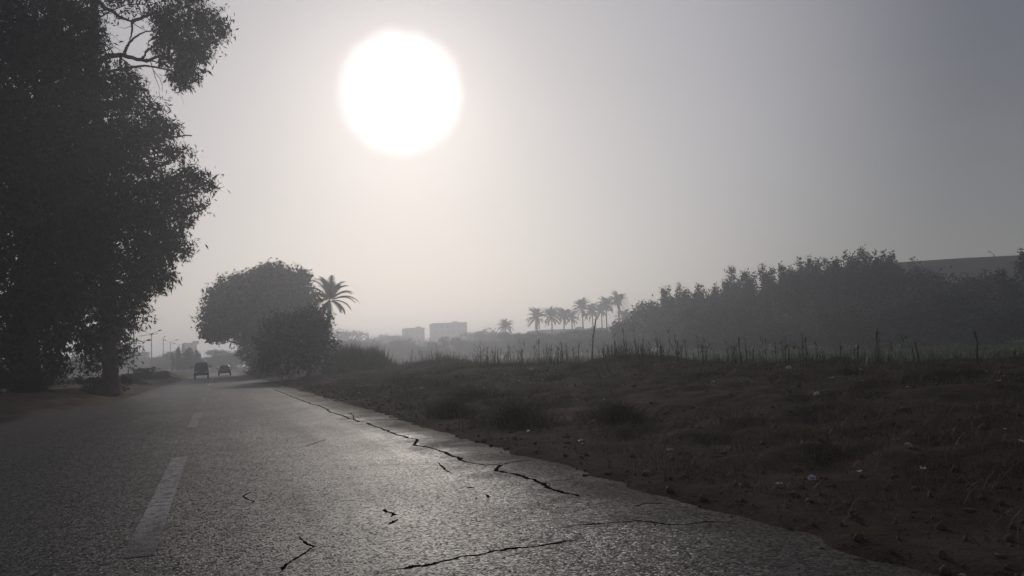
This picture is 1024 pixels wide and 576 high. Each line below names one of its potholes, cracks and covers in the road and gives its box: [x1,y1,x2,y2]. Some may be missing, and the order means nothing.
crack [273,389,580,498]
crack [383,503,719,571]
crack [280,537,315,572]
